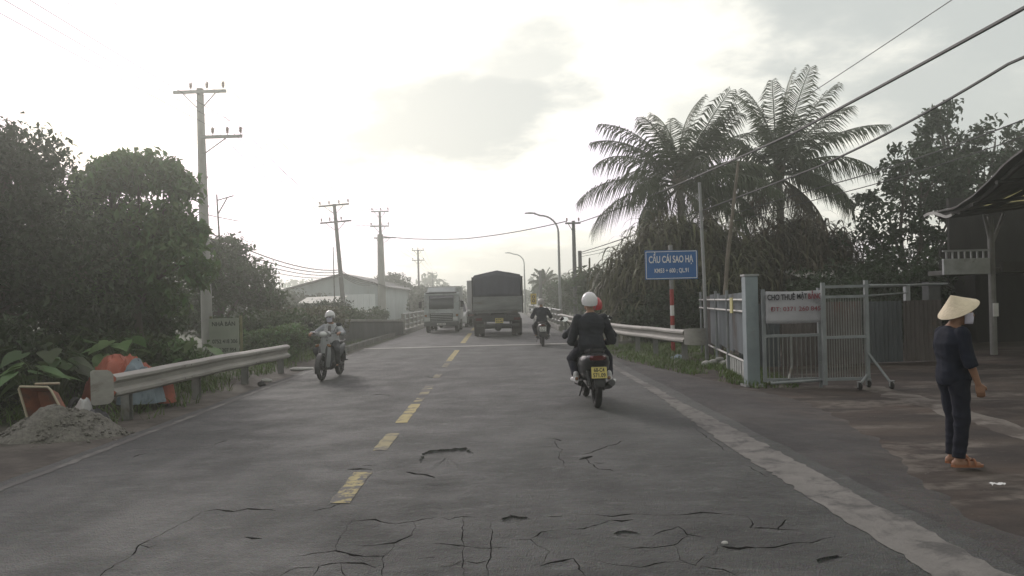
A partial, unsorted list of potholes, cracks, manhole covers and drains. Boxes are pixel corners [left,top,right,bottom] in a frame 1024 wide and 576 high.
pothole [816,555,842,565]
crack [284,516,493,576]
crack [553,438,621,471]
crack [516,512,832,576]
pothole [419,447,473,470]
pothole [502,515,533,526]
crack [100,508,271,576]
